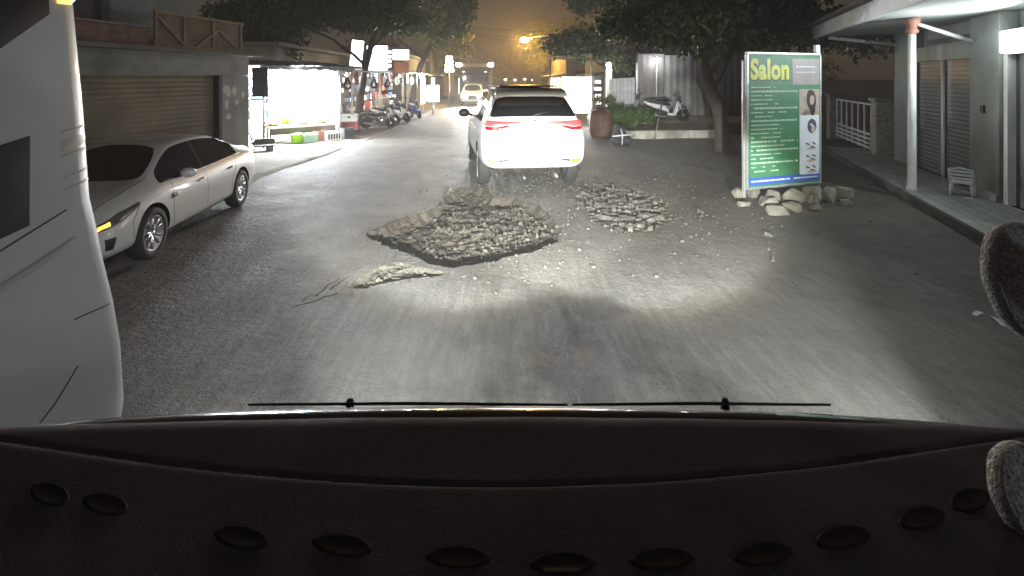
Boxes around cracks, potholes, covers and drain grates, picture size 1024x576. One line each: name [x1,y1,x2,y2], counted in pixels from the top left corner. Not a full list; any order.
pothole [346,261,449,289]
crack [292,262,373,308]
pothole [366,186,563,268]
pothole [562,181,682,236]
